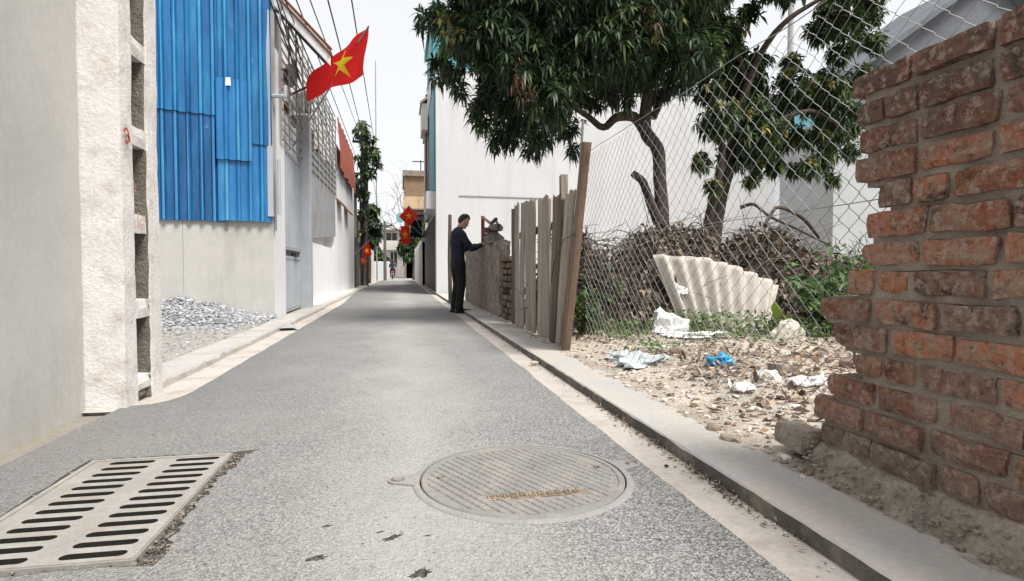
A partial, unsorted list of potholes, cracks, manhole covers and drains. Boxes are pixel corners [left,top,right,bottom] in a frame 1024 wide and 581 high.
drain grate [0,453,233,577]
manhole cover [388,445,641,525]
